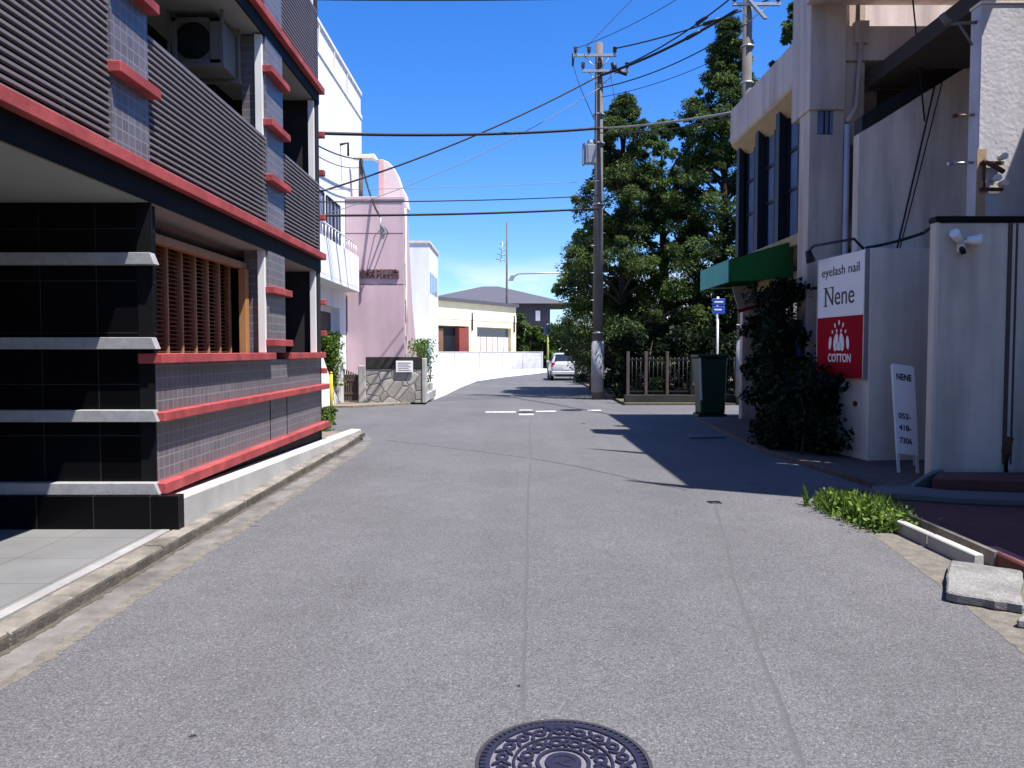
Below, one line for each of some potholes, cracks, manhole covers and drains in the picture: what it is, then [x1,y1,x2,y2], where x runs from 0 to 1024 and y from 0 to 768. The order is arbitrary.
manhole cover [475,719,653,768]
